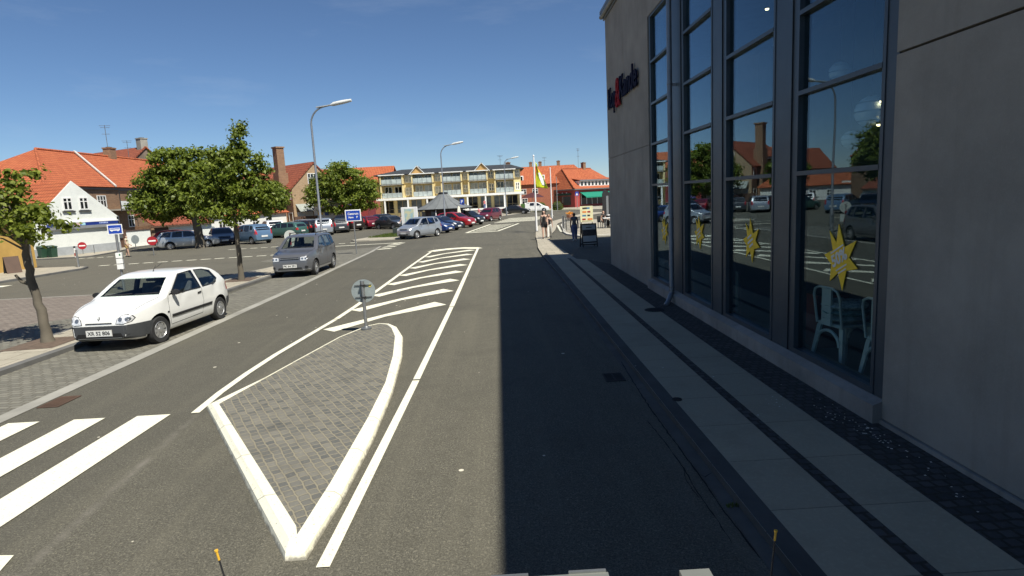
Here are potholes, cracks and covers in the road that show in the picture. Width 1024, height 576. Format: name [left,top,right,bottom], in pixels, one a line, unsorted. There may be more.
drain grate [602,372,626,382]
